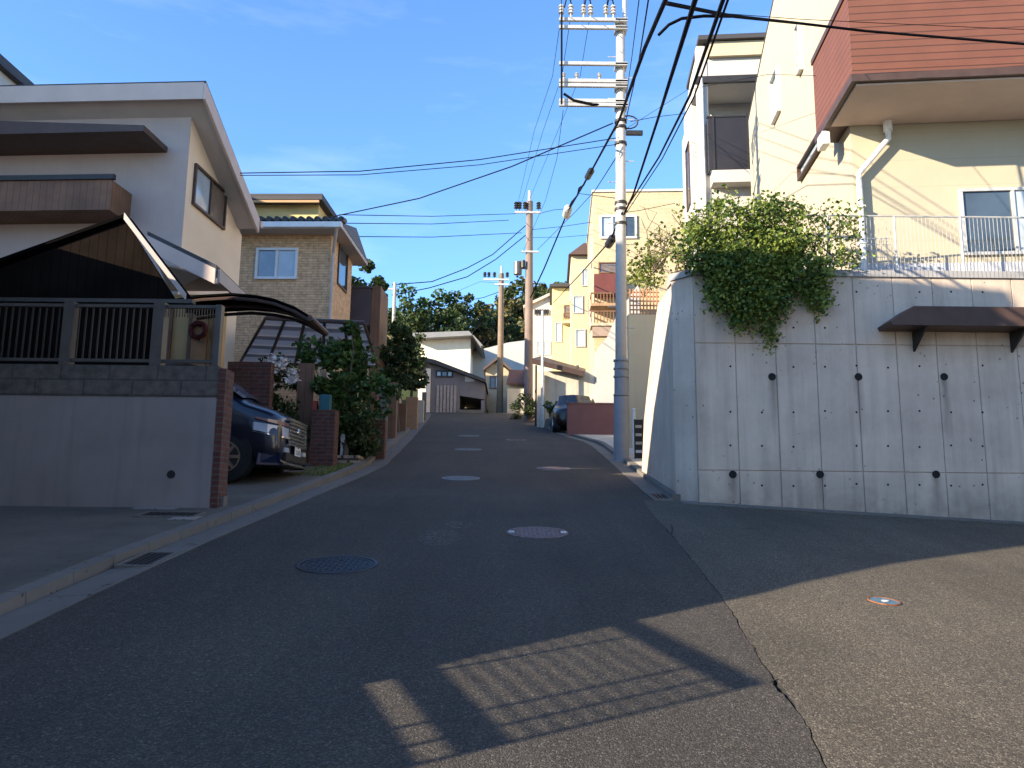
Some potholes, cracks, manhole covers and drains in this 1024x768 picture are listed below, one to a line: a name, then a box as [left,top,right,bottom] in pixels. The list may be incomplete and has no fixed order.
manhole cover [296,555,378,574]
drain grate [114,551,179,569]
manhole cover [507,527,569,539]
drain grate [646,493,674,501]
